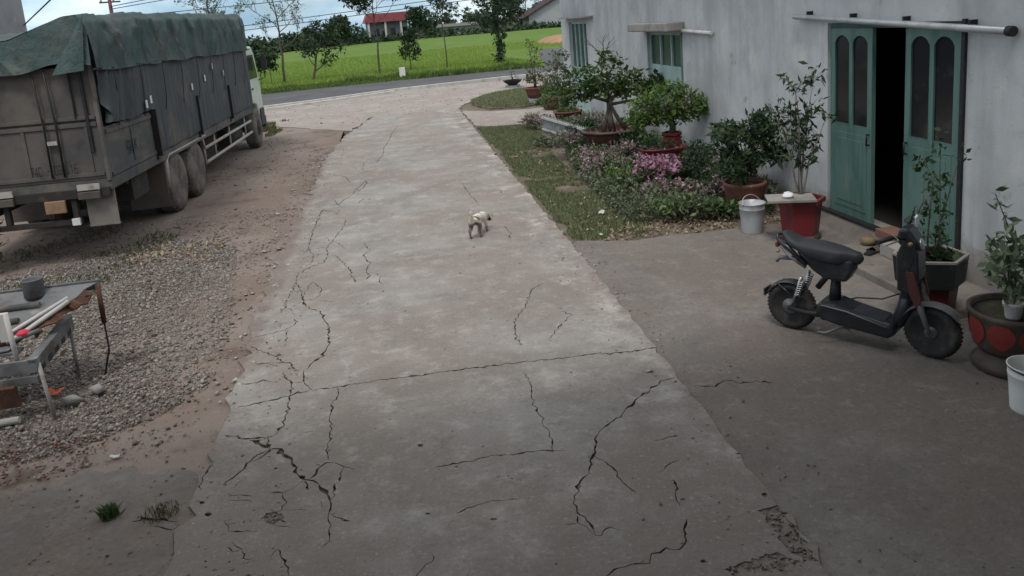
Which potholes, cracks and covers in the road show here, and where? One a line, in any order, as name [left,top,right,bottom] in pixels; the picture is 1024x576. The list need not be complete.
crack [198,127,693,576]
pothole [758,505,819,563]
pothole [724,552,804,576]
